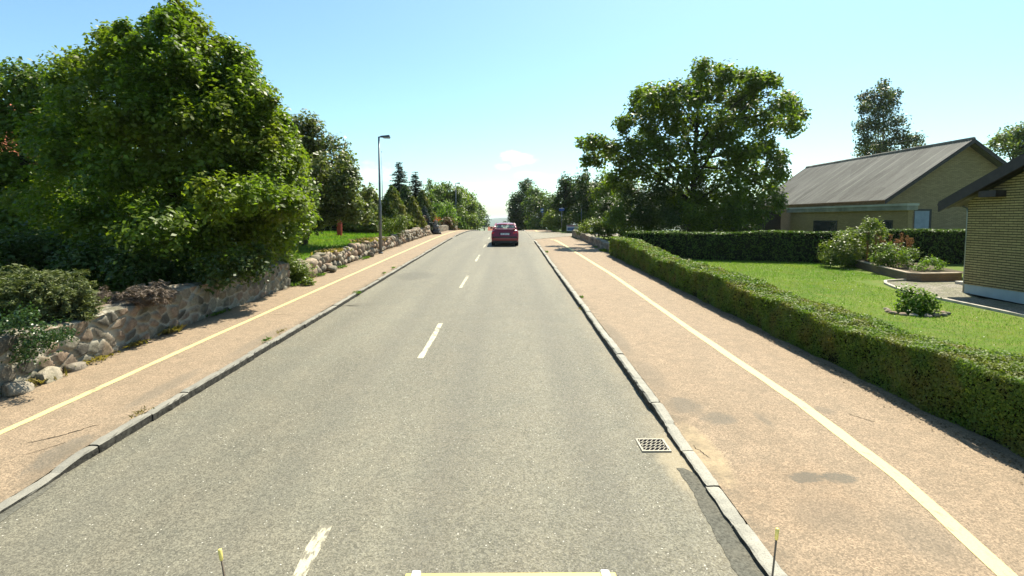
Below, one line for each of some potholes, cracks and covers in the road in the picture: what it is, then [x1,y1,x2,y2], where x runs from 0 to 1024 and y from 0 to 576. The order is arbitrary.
drain grate [635,438,672,452]
